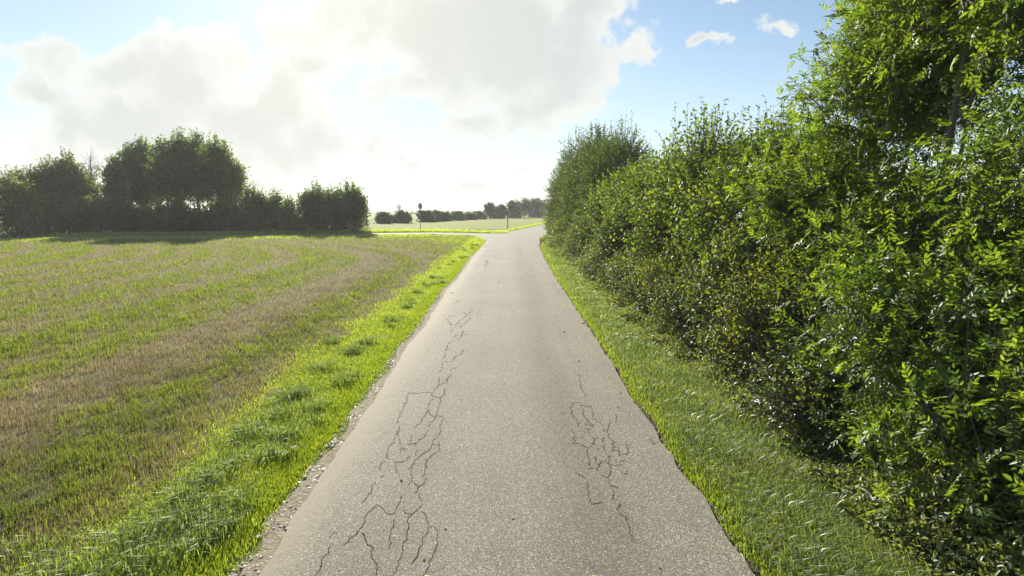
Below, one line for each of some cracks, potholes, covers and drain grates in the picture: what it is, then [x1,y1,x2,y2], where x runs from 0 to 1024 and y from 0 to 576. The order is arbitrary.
crack [565,373,633,541]
crack [315,300,470,576]
